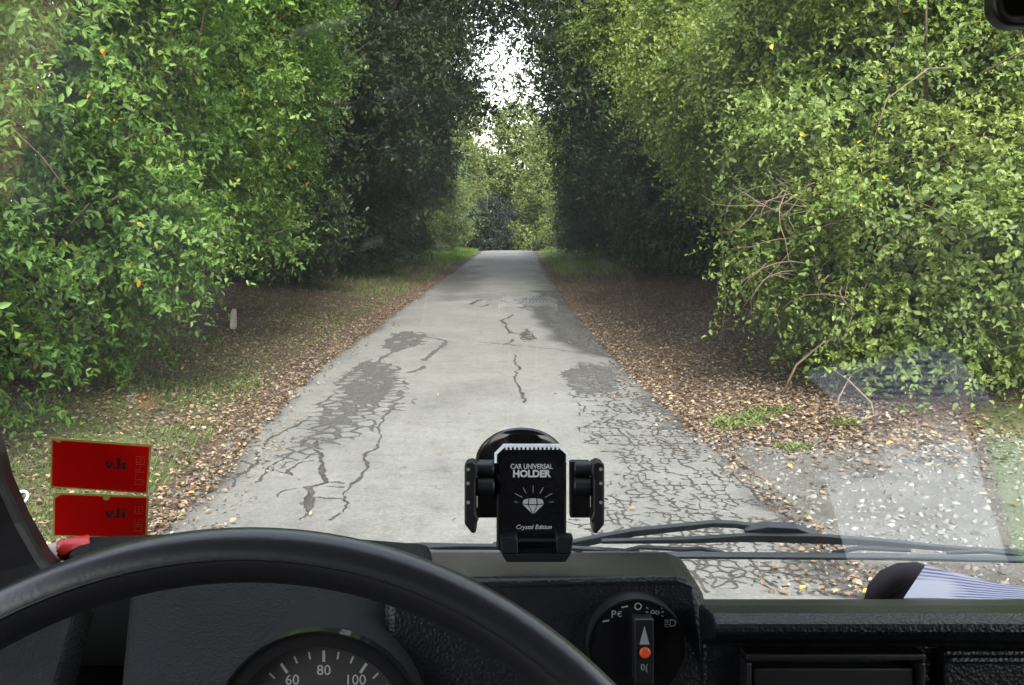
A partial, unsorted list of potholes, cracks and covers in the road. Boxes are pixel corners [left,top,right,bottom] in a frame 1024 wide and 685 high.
crack [231,331,452,520]
crack [470,291,856,597]
